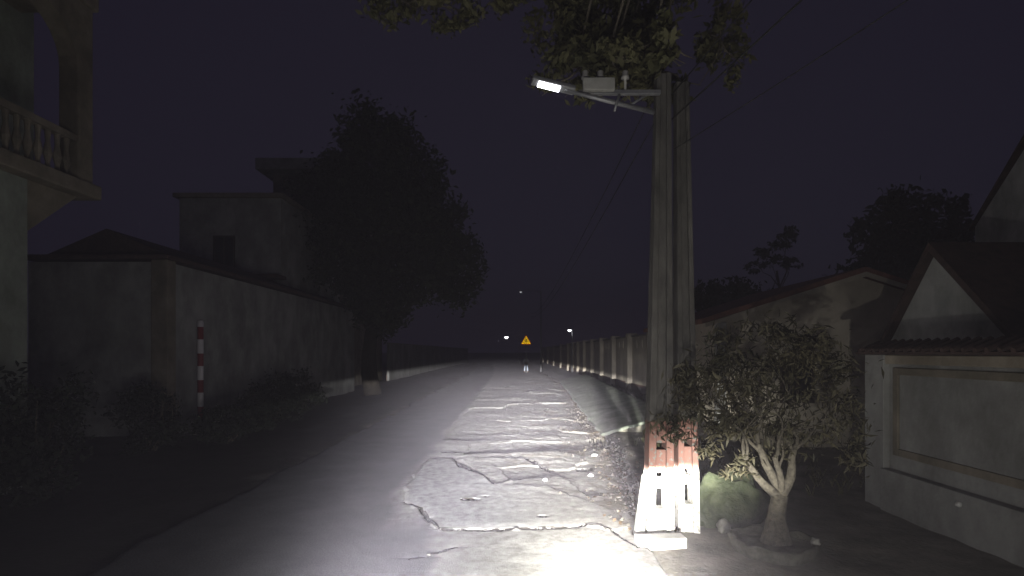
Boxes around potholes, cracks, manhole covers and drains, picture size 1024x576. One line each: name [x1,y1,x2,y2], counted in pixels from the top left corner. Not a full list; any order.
crack [403,502,640,560]
crack [442,440,623,497]
